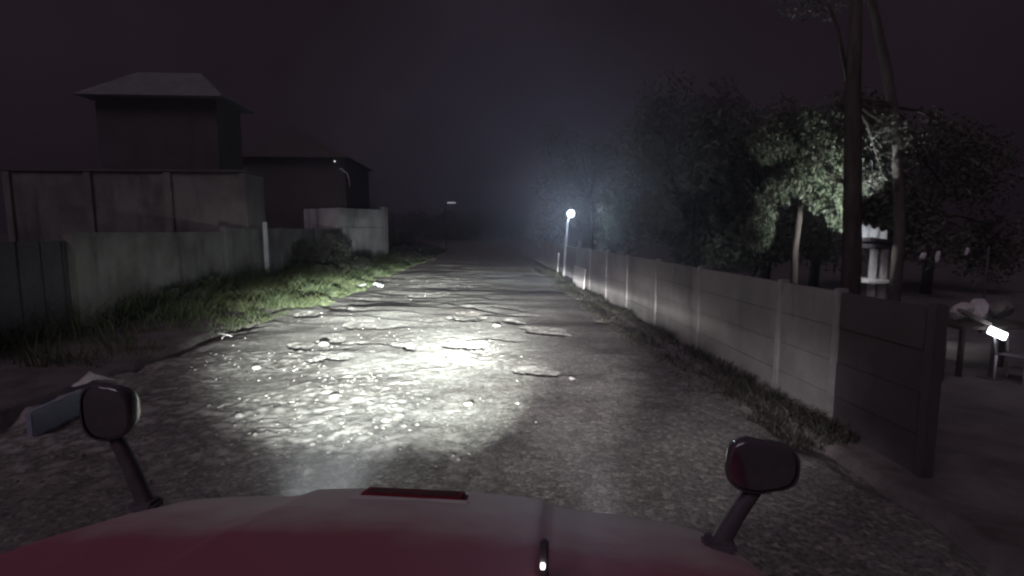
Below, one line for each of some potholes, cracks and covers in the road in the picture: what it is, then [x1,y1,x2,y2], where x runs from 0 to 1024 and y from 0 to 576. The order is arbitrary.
pothole [445,309,490,322]
pothole [511,363,563,378]
pothole [341,316,380,330]
pothole [440,339,494,351]
pothole [403,342,418,351]
pothole [503,316,527,325]
pothole [518,325,573,337]
pothole [315,333,348,344]
